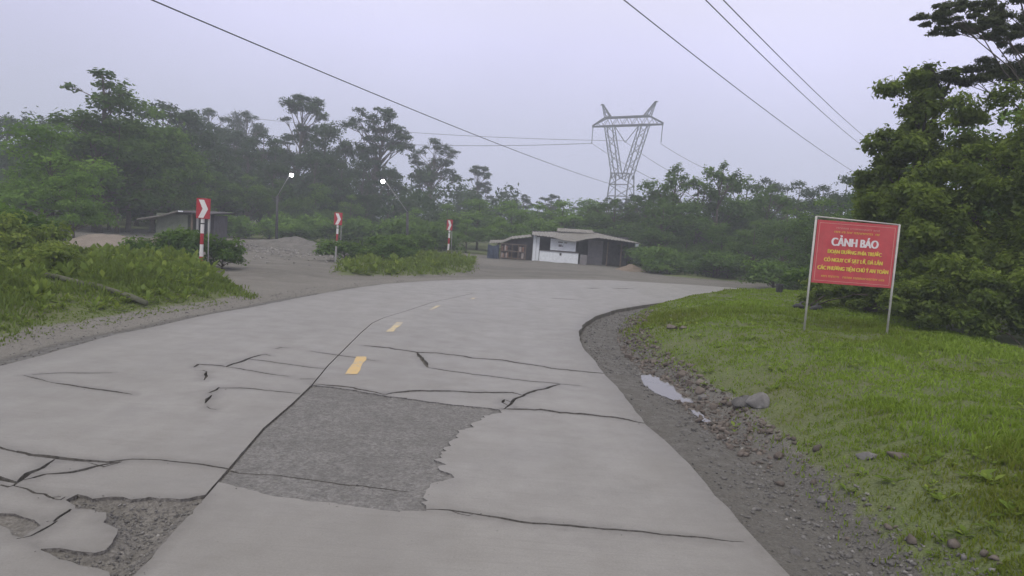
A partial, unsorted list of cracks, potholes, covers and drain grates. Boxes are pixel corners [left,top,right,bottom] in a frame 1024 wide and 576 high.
crack [0,447,407,539]
pothole [41,494,205,576]
pothole [0,513,41,538]
crack [426,509,742,542]
crack [24,373,129,394]
crack [194,346,642,423]
